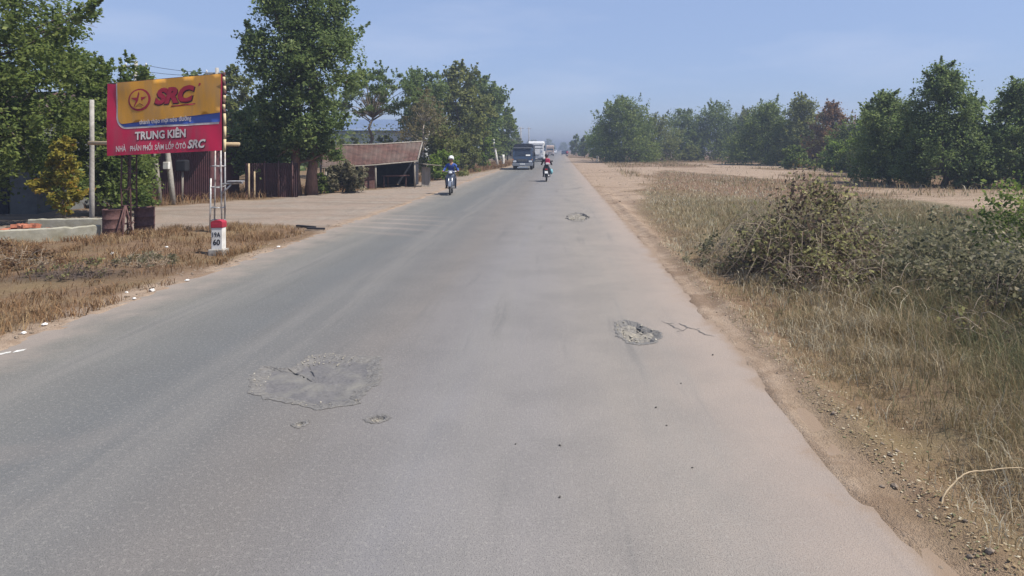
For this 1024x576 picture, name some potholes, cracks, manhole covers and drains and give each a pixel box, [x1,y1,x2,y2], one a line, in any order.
pothole [248,353,384,410]
pothole [363,414,392,423]
pothole [290,419,309,428]
pothole [565,212,590,221]
pothole [614,319,663,345]
